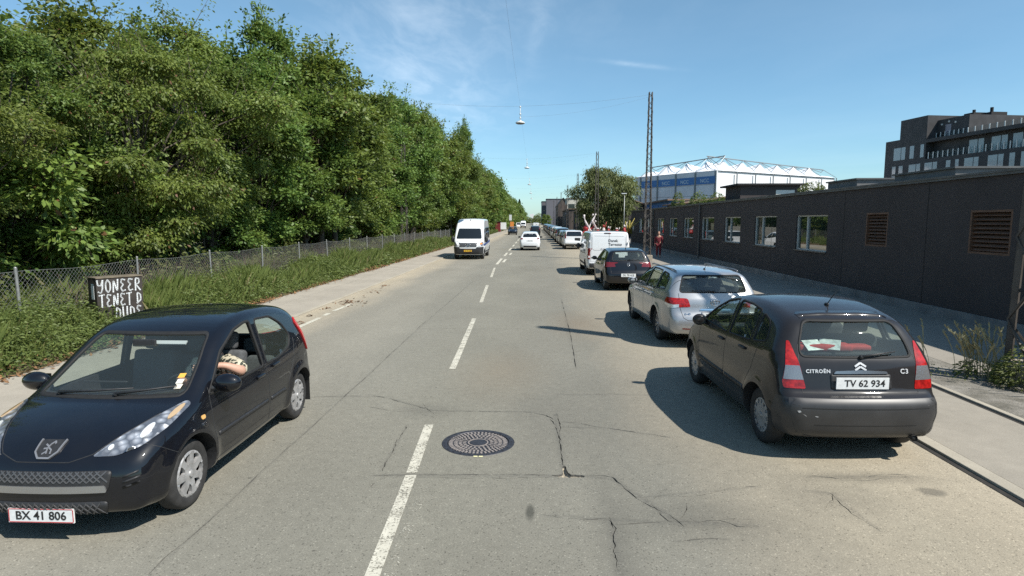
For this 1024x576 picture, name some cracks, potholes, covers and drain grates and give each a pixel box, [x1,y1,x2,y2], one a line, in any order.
crack [310,396,664,487]
crack [548,475,755,571]
manhole cover [442,430,514,456]
crack [819,474,900,525]
